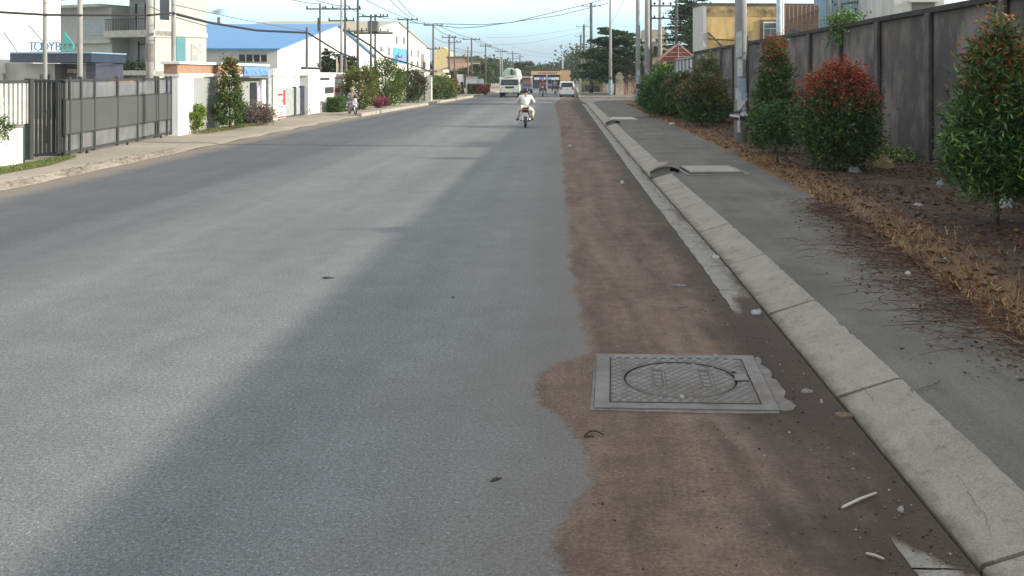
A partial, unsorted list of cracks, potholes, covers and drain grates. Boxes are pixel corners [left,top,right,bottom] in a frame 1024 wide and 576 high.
manhole cover [590,354,796,414]
